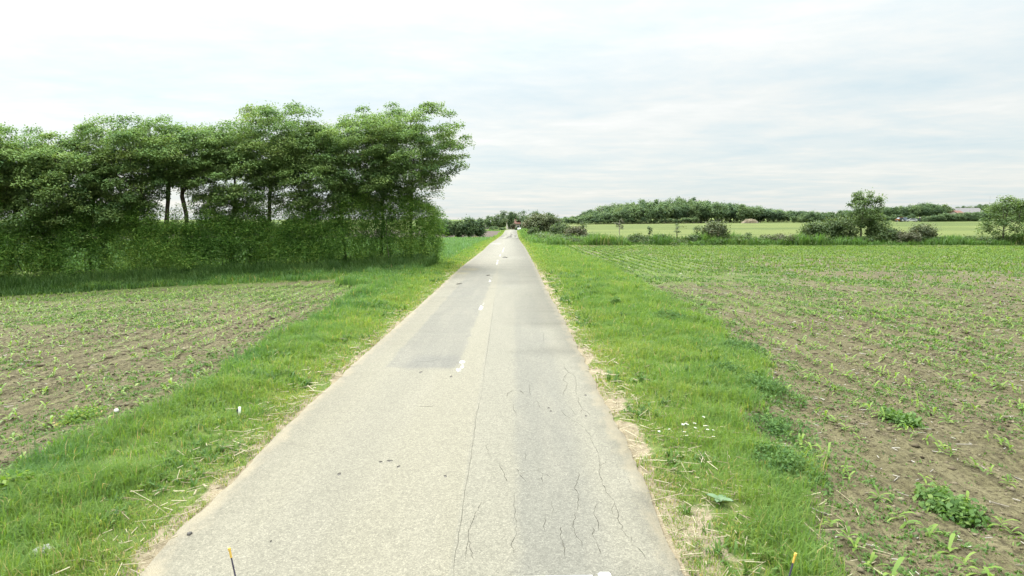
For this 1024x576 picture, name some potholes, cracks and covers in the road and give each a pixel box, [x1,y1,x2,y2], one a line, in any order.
crack [543,367,645,558]
